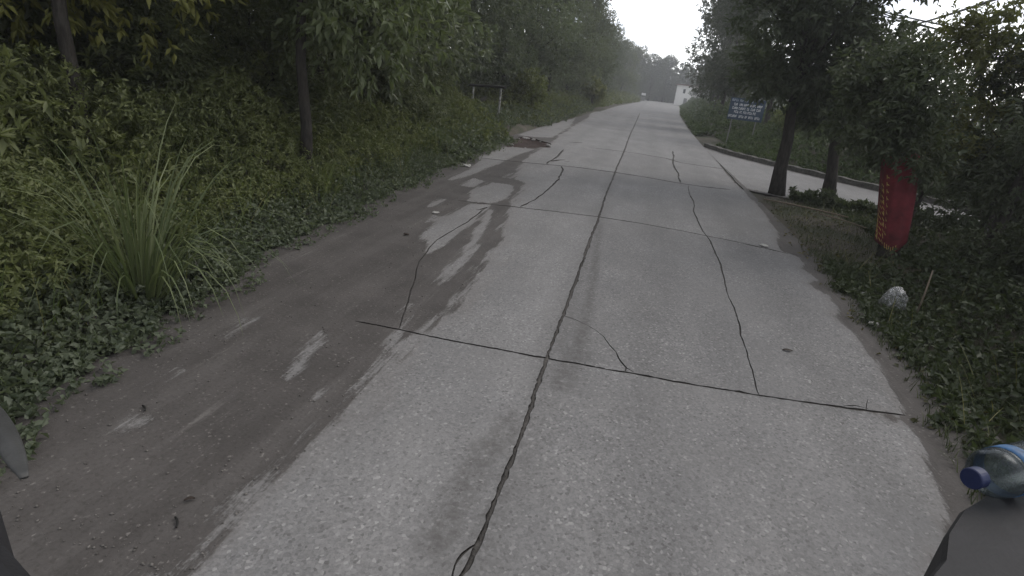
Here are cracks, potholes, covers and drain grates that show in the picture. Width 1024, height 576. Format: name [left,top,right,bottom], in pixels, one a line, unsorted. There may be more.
crack [562,316,633,373]
crack [451,545,477,576]
crack [672,151,759,394]
pothole [506,137,552,148]
crack [520,142,578,207]
